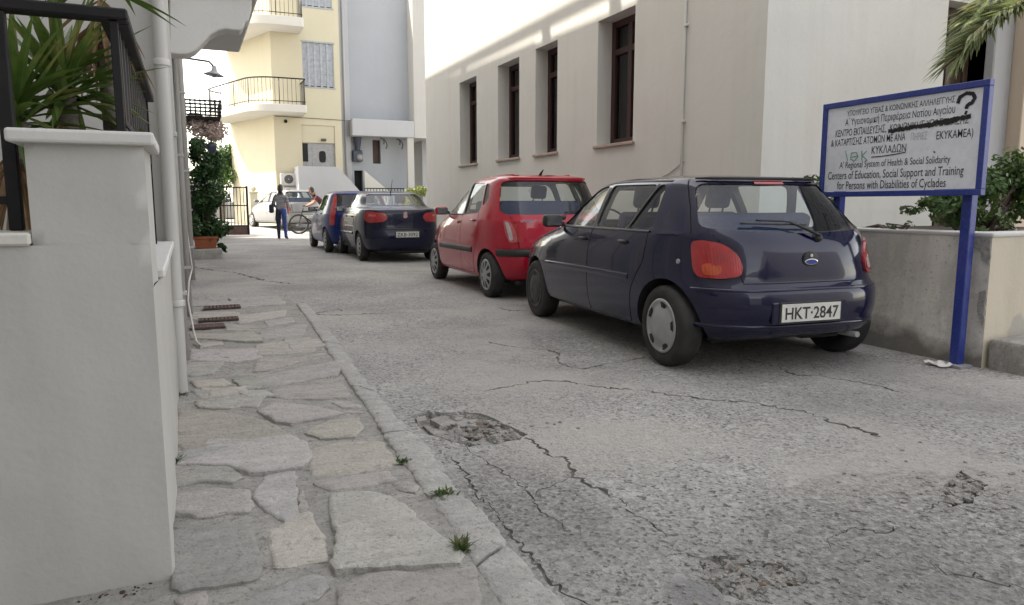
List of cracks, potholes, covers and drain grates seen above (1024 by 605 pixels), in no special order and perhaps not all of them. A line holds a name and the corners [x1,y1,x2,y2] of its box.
crack [451,437,666,605]
pothole [410,411,528,447]
crack [195,266,291,284]
crack [827,525,895,548]
crack [487,341,881,437]
pothole [939,470,988,507]
